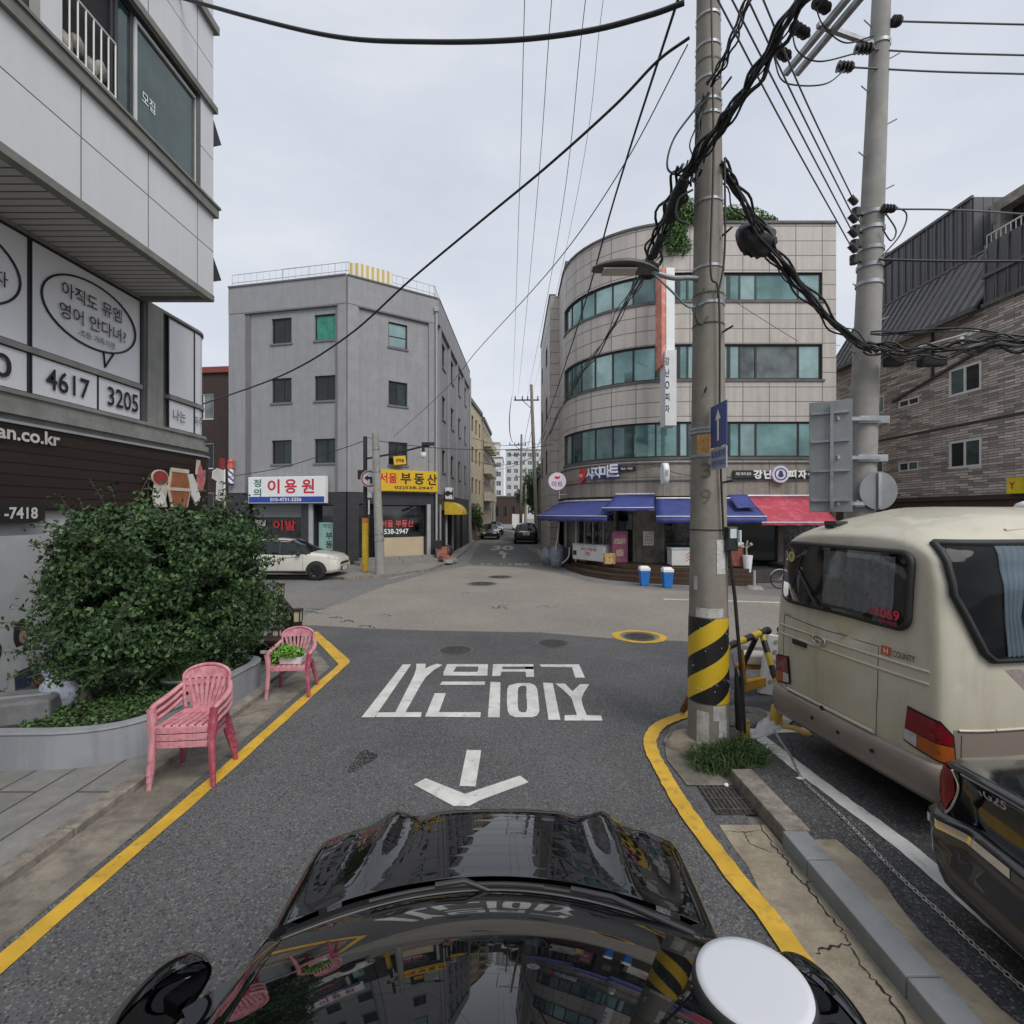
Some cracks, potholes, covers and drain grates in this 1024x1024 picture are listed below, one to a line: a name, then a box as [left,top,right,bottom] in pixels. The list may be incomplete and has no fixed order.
manhole cover [612,630,667,643]
pothole [348,750,377,774]
manhole cover [438,645,474,655]
manhole cover [536,639,570,648]
drain grate [697,785,758,815]
crack [725,821,906,1024]
